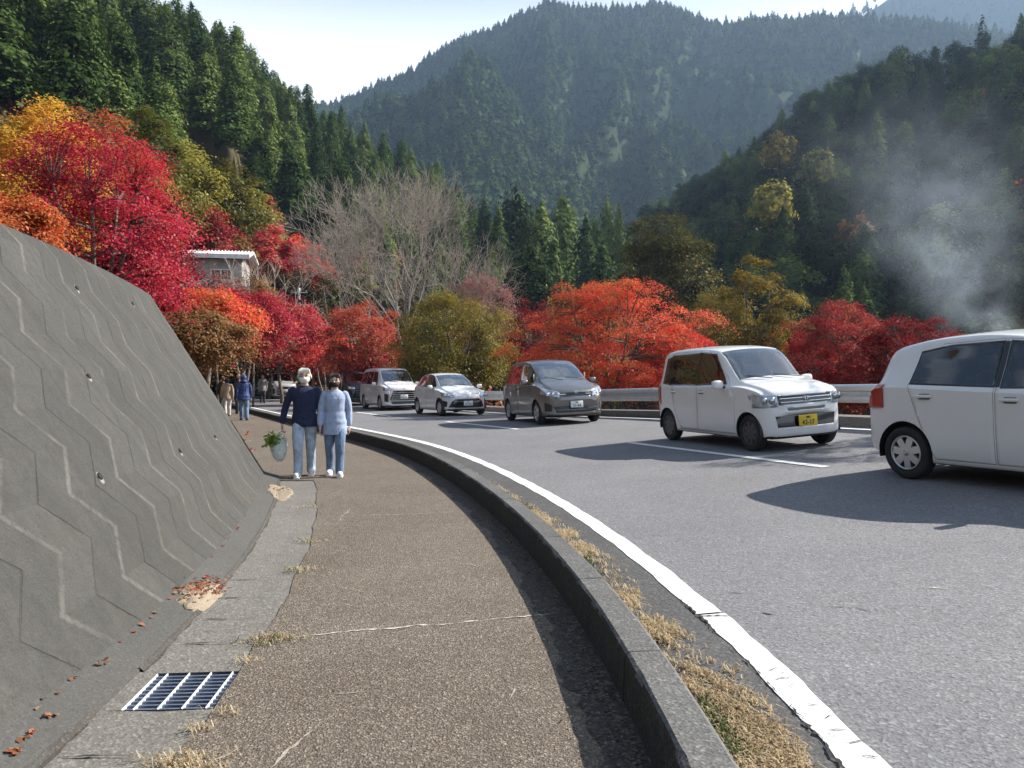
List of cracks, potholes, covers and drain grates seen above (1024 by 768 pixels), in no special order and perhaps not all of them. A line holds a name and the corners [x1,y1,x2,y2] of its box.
crack [681,598,729,633]
drain grate [100,671,239,711]
crack [271,691,360,768]
crack [297,612,555,637]
